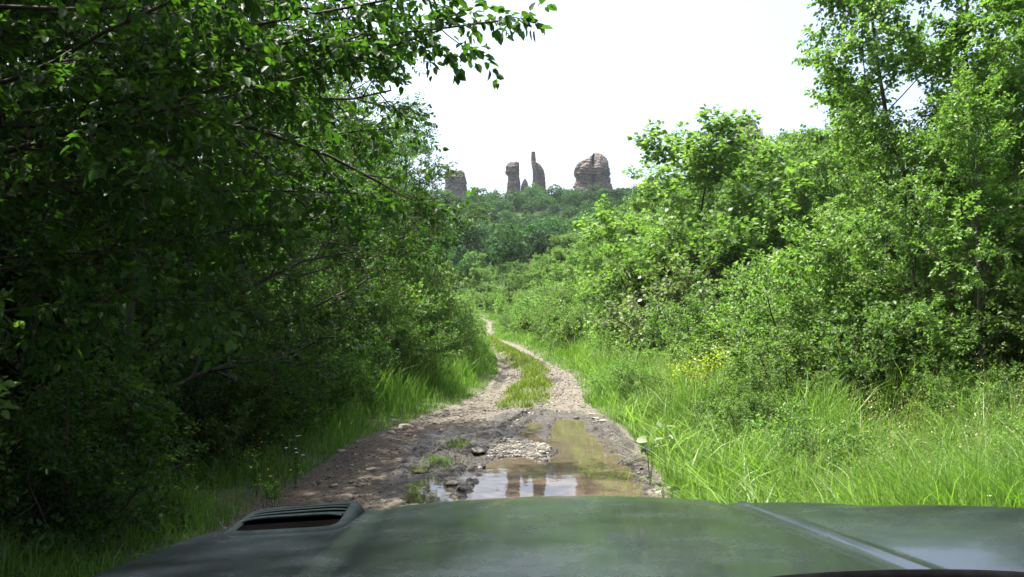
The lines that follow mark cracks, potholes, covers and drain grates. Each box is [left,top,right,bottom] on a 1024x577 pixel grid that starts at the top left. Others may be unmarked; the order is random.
pothole [454,417,659,501]
pothole [437,463,480,486]
